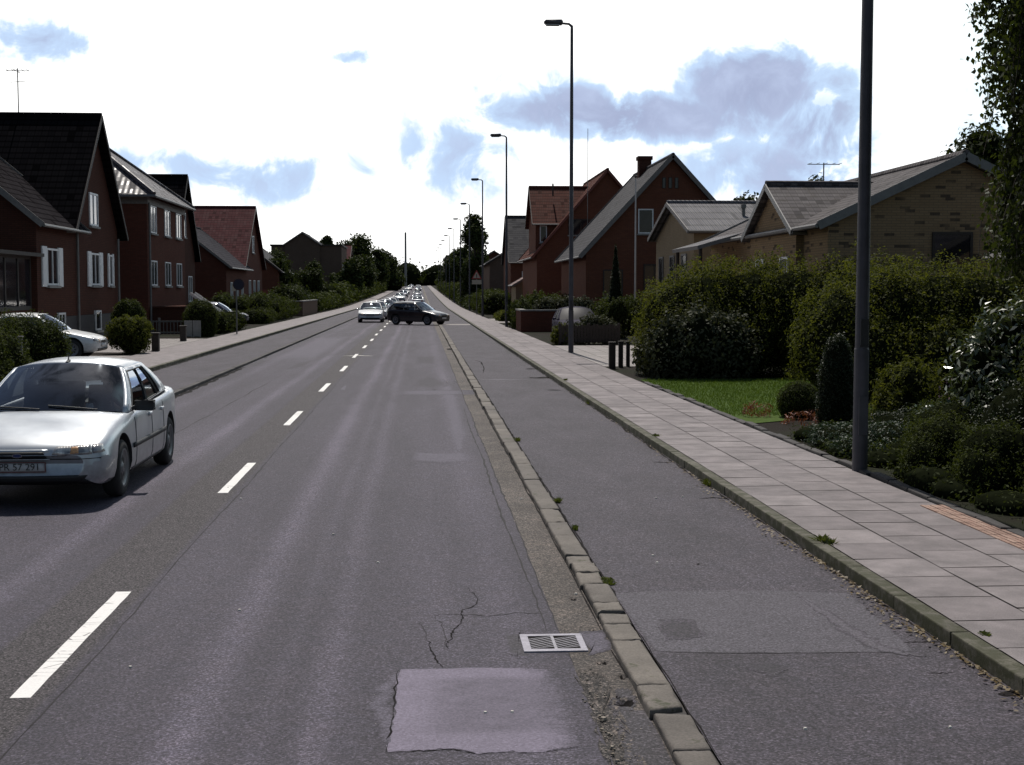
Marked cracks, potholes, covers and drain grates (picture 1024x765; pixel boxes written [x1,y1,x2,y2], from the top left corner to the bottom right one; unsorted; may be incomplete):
drain grate [519,633,588,653]
crack [420,589,549,668]
